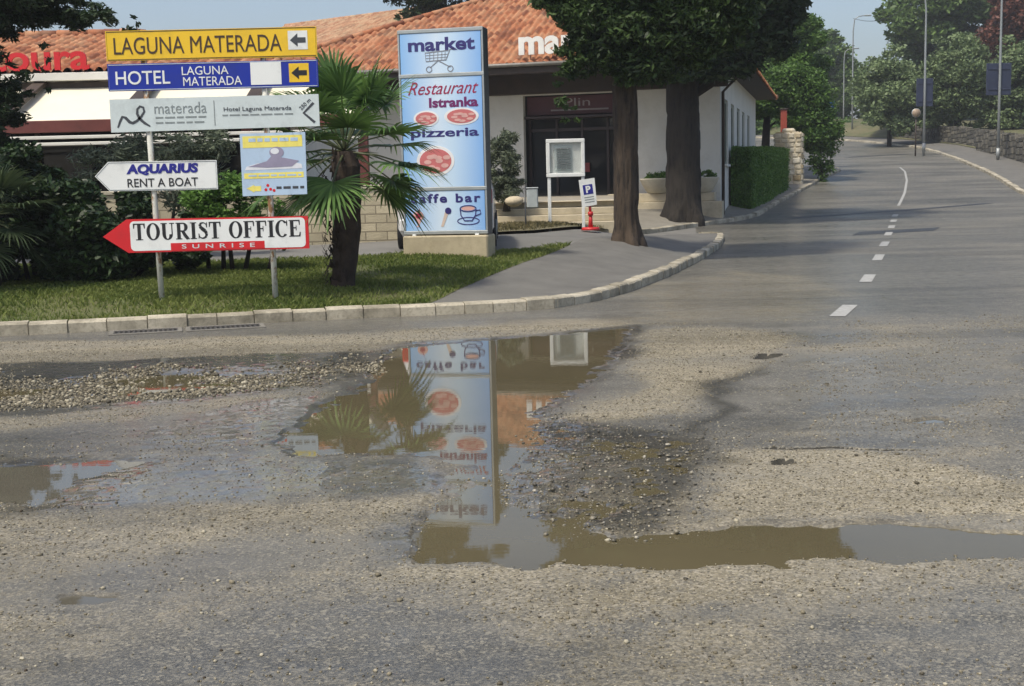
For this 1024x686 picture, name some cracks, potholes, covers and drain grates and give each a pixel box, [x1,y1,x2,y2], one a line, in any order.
pothole [0,454,176,514]
pothole [265,326,1024,569]
pothole [55,591,123,605]
pothole [0,352,385,409]
drain grate [108,327,183,336]
drain grate [186,323,266,332]
